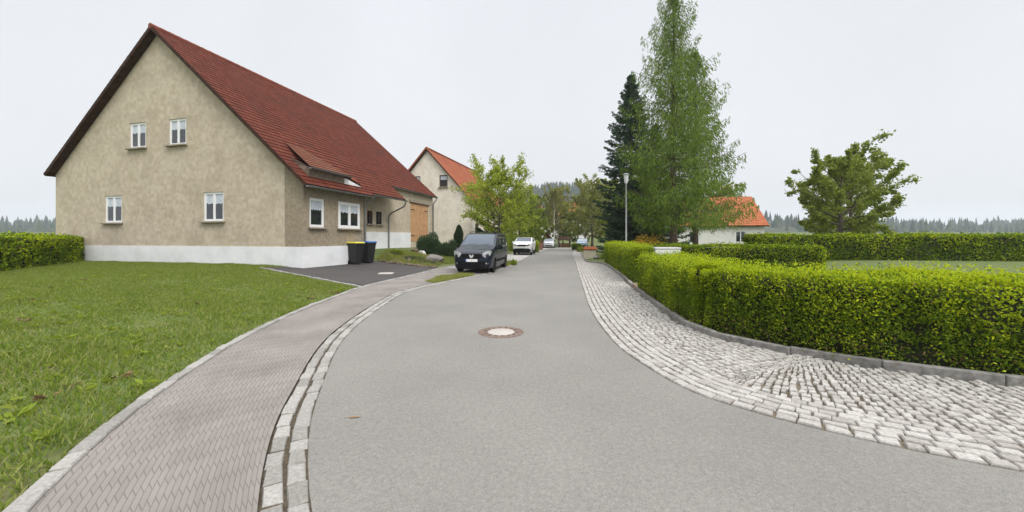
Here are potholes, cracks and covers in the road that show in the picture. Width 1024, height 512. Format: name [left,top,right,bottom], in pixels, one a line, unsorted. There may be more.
manhole cover [478,326,524,338]
